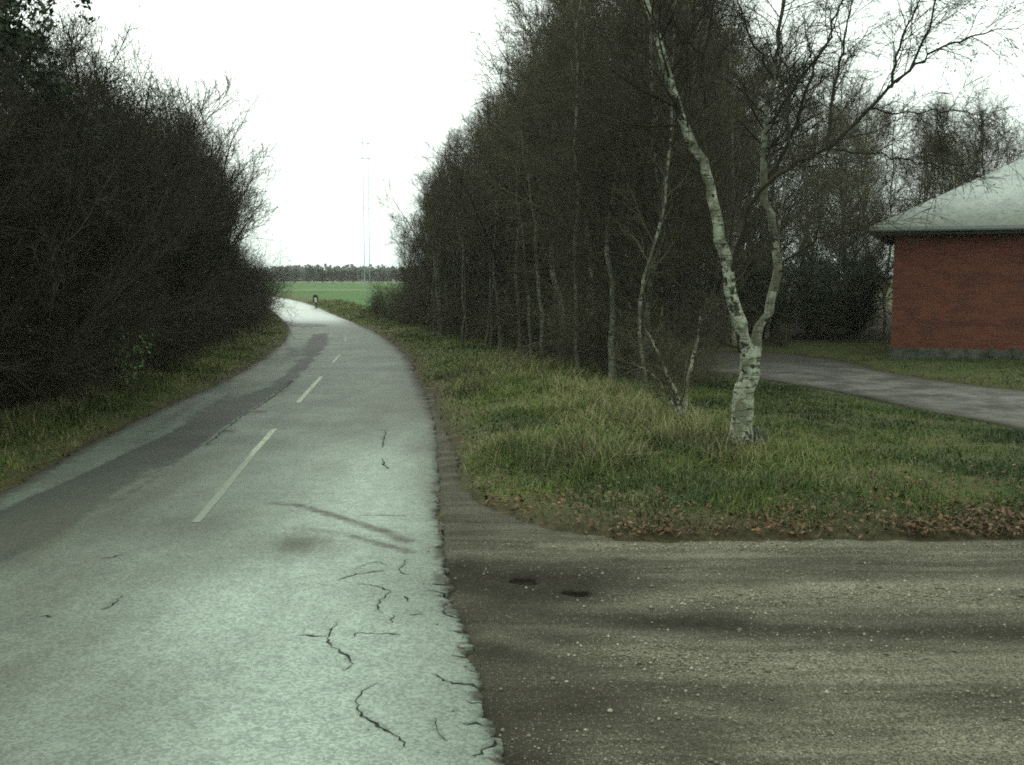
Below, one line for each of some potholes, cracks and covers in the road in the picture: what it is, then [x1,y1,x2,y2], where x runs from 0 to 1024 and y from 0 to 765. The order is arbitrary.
crack [355,685,406,746]
crack [433,674,496,756]
crack [299,561,423,671]
